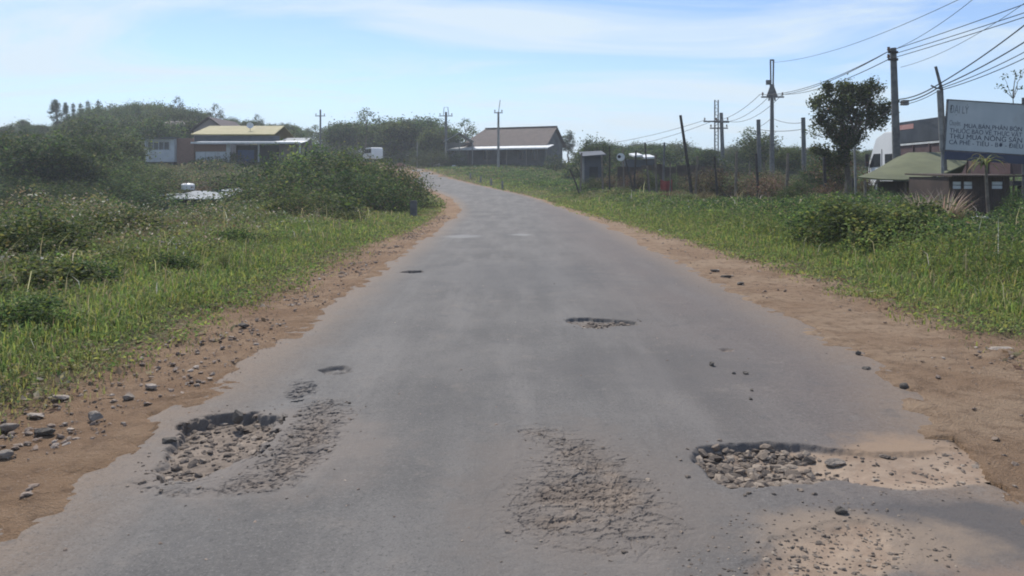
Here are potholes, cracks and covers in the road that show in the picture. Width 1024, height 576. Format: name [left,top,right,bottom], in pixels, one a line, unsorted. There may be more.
pothole [558,316,652,330]
pothole [676,438,995,499]
pothole [125,405,303,493]
pothole [312,363,363,377]
